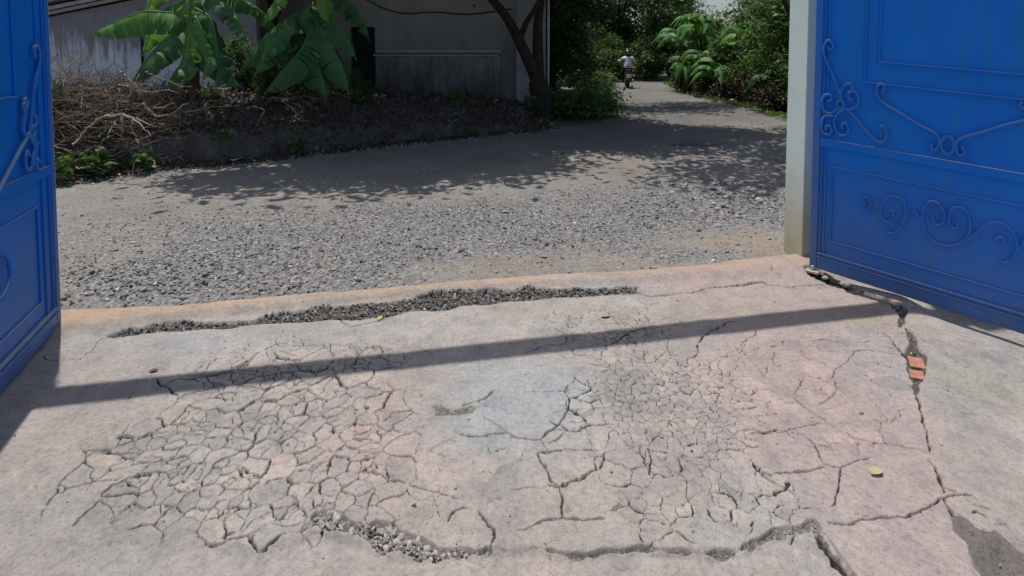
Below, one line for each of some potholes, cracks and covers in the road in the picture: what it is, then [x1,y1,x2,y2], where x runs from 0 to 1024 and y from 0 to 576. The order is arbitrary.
crack [407,319,905,548]
crack [535,307,679,360]
pothole [311,512,492,564]
pothole [110,284,637,338]
crack [41,339,426,553]
pothole [951,516,1024,576]
